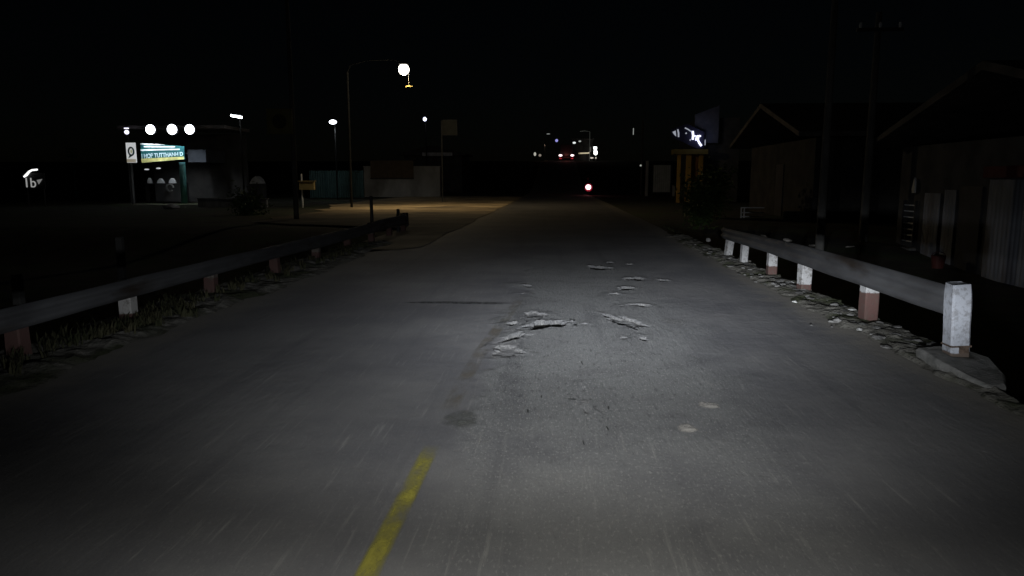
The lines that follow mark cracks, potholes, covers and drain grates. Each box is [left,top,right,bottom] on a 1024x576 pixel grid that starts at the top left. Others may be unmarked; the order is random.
pothole [492,319,528,329]
pothole [627,333,657,345]
pothole [516,309,560,320]
pothole [587,310,672,335]
pothole [484,342,540,361]
pothole [499,318,580,332]
pothole [478,327,539,349]
